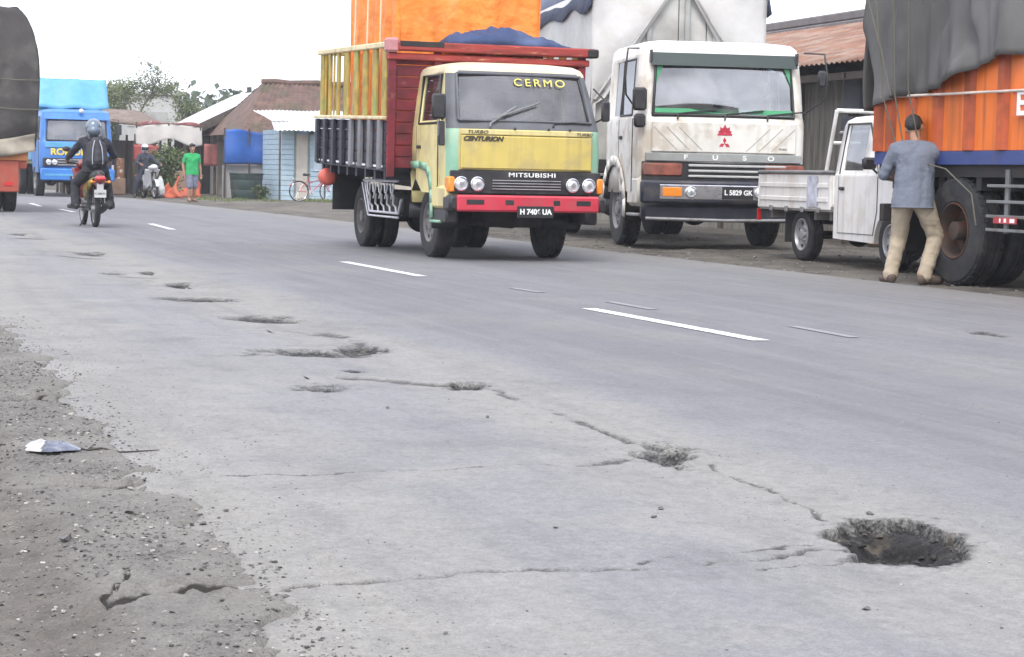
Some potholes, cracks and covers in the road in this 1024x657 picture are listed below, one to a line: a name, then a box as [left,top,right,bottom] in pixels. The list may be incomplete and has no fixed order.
pothole [114,269,173,279]
pothole [321,342,412,358]
crack [70,540,863,624]
pothole [133,280,211,293]
pothole [133,294,263,305]
pothole [609,434,722,480]
pothole [266,381,374,396]
pothole [428,380,510,394]
pothole [209,345,384,361]
pothole [789,507,1014,576]
